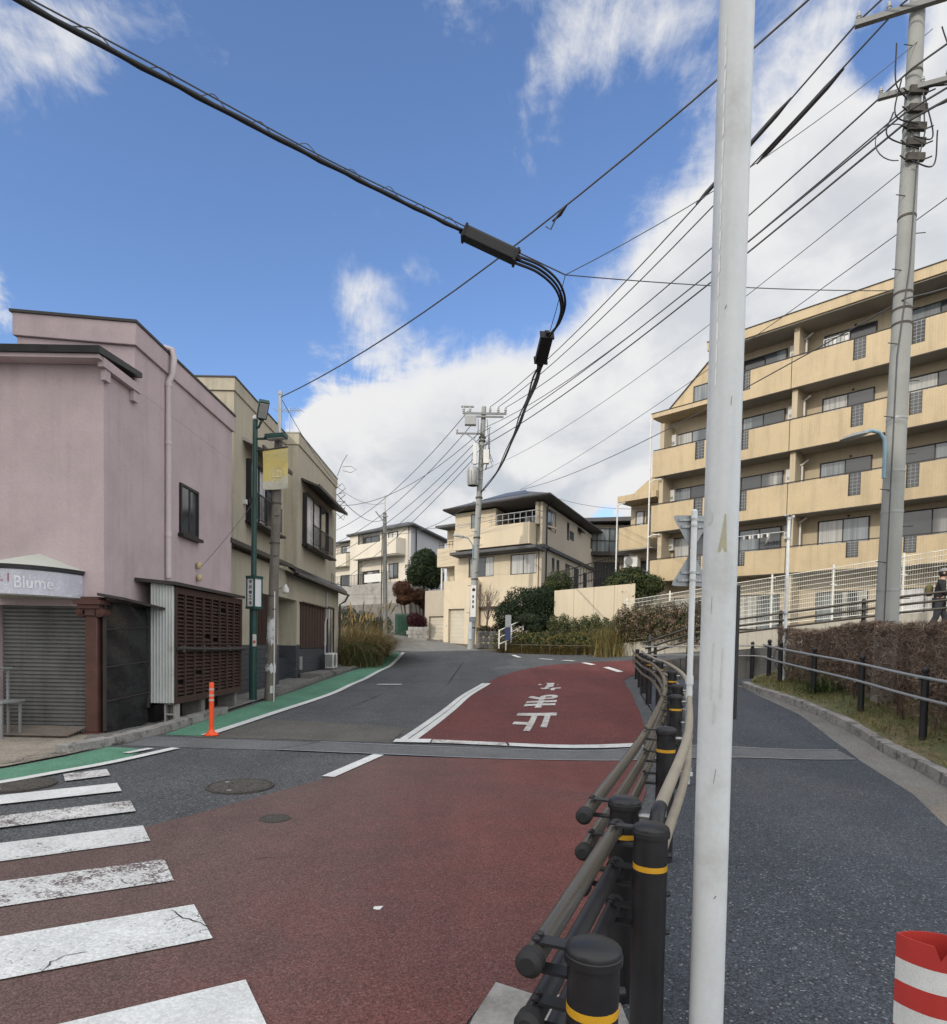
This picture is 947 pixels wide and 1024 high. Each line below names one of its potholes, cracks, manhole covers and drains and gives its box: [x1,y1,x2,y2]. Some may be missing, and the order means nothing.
manhole cover [205,778,274,795]
manhole cover [259,814,290,823]
manhole cover [0,777,58,794]
